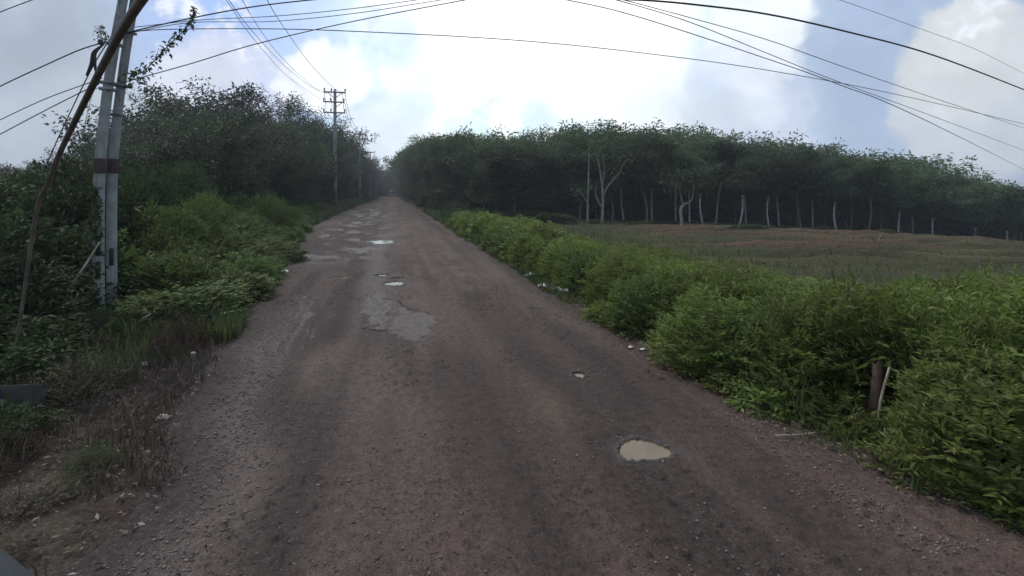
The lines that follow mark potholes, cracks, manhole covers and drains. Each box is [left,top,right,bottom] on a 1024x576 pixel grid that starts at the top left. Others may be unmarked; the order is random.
pothole [570,370,588,379]
pothole [611,435,681,464]
